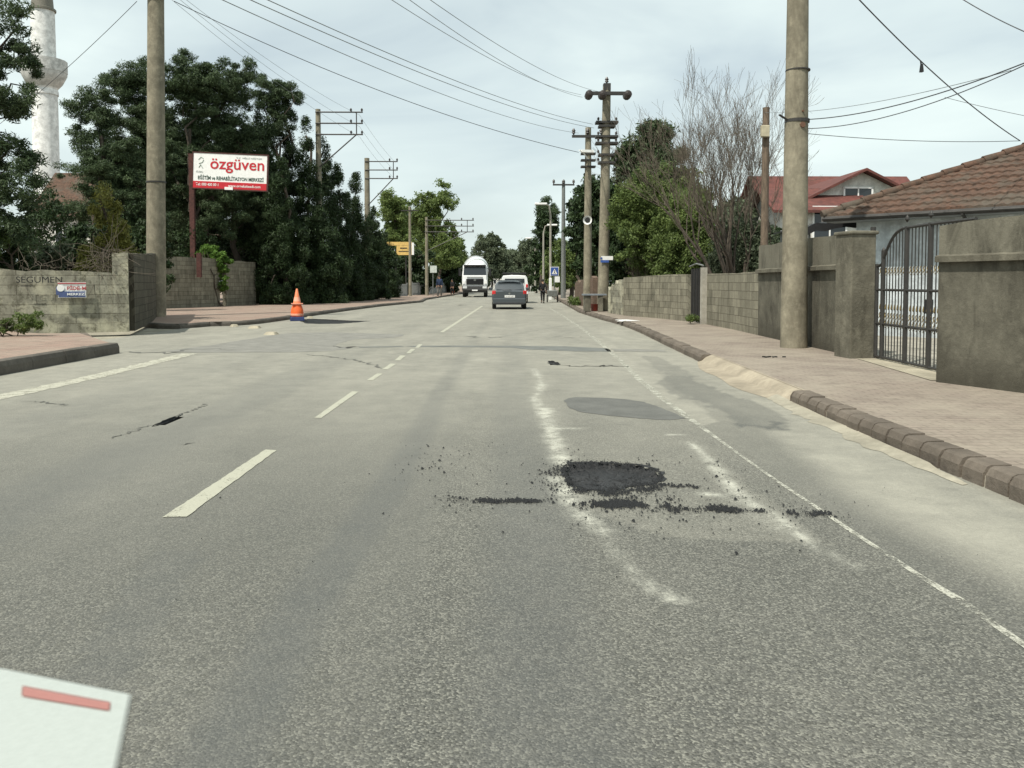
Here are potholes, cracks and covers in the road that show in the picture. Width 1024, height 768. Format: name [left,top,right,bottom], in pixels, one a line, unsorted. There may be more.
pothole [560,461,667,491]
pothole [152,413,183,427]
crack [111,403,207,438]
